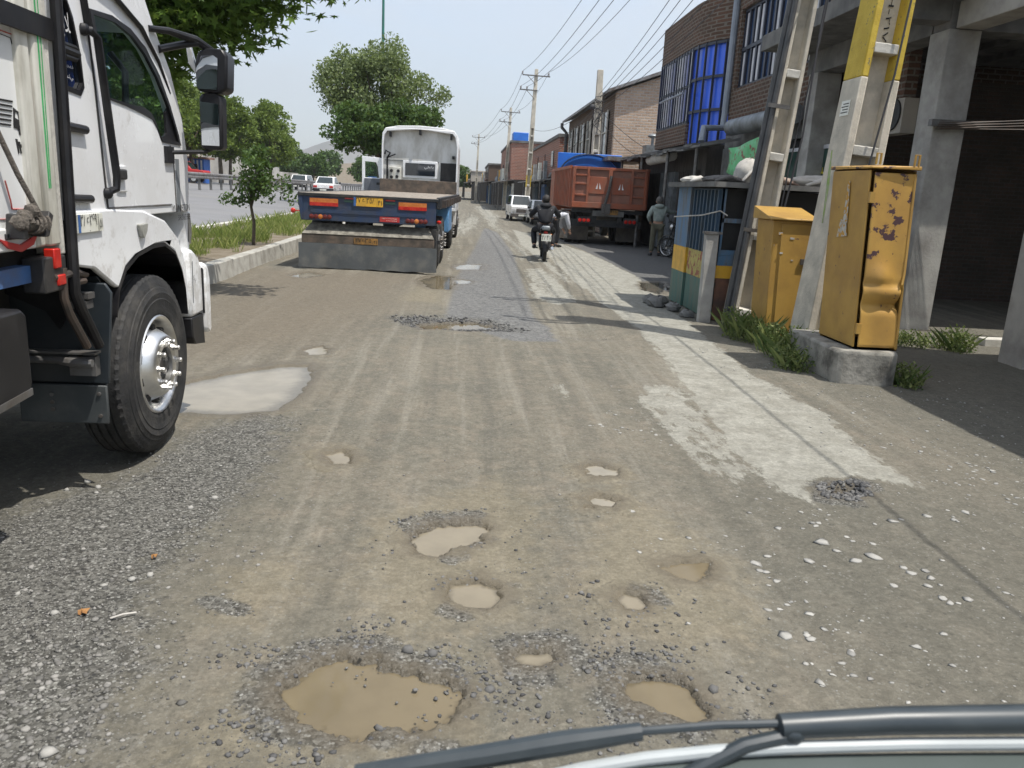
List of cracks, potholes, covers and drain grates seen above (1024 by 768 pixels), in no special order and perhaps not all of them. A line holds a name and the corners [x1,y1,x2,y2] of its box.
pothole [801,477,888,508]
pothole [236,639,496,768]
pothole [559,457,636,485]
pothole [413,274,461,291]
pothole [587,655,744,743]
pothole [385,511,513,565]
pothole [420,568,527,620]
